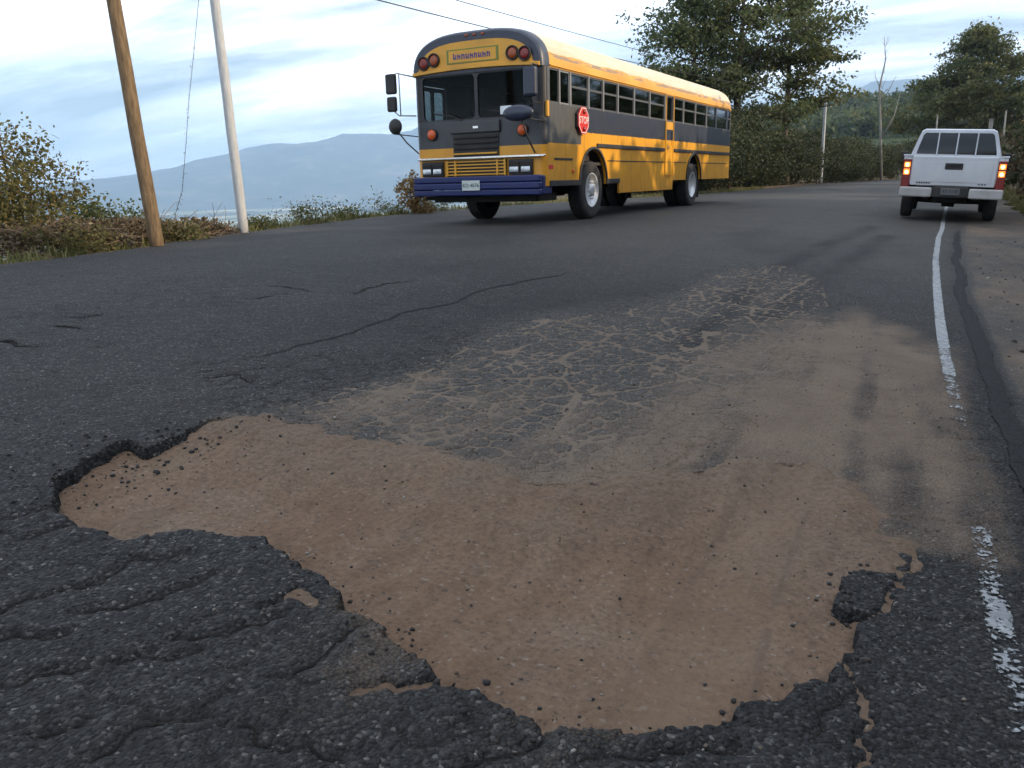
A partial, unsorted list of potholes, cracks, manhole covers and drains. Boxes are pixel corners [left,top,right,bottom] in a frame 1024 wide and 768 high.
crack [233,724,346,762]
pothole [59,413,925,735]
crack [280,266,829,480]
crack [118,588,434,696]
crack [35,717,206,764]
crack [12,664,100,687]
crack [0,314,101,347]
crack [950,230,1024,488]
crack [0,553,211,613]
